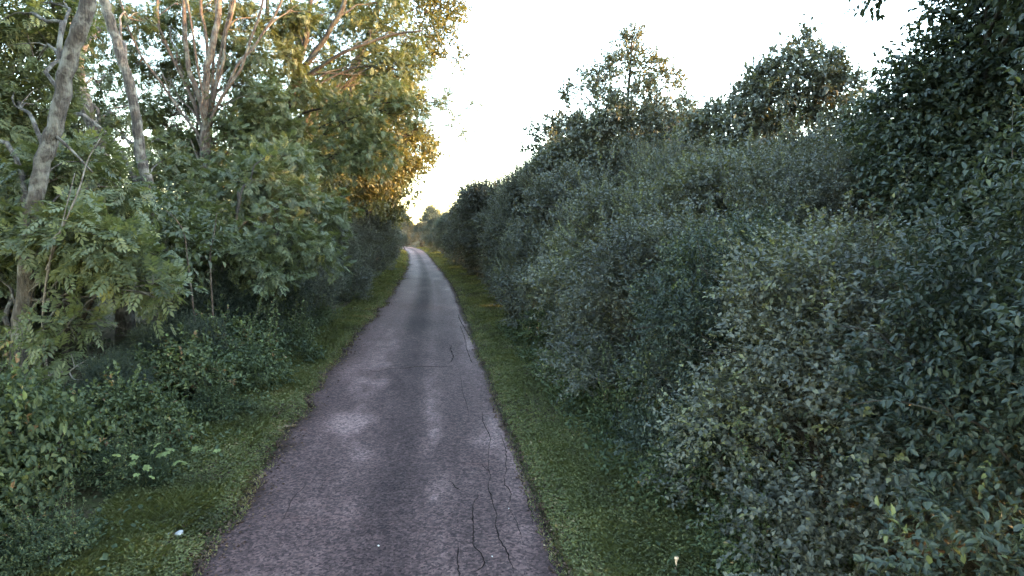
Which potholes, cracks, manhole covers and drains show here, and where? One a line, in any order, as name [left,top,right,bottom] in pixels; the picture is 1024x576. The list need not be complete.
crack [449,382,534,576]
crack [370,315,474,372]
